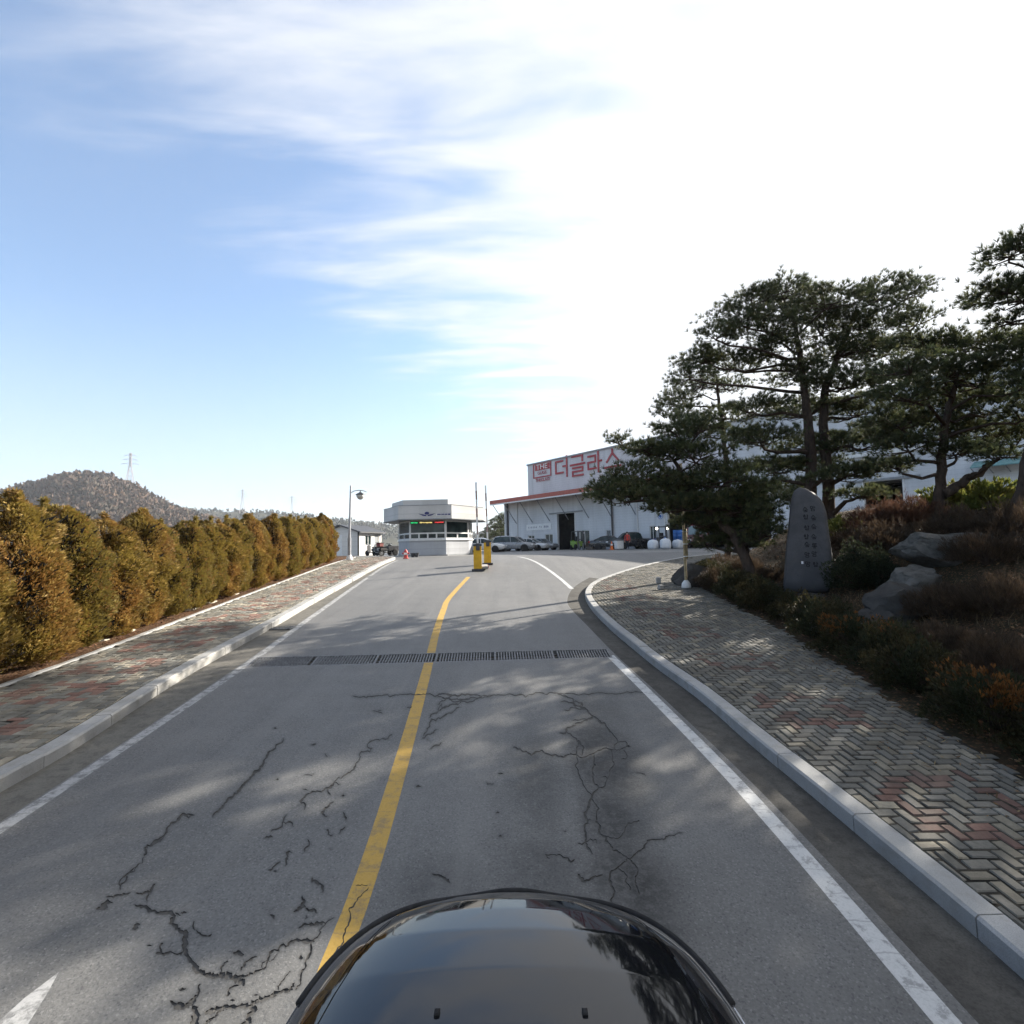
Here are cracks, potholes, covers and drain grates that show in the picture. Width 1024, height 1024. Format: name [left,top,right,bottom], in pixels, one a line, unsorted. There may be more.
drain grate [245,649,612,668]
crack [96,728,393,1024]
crack [354,691,681,903]
